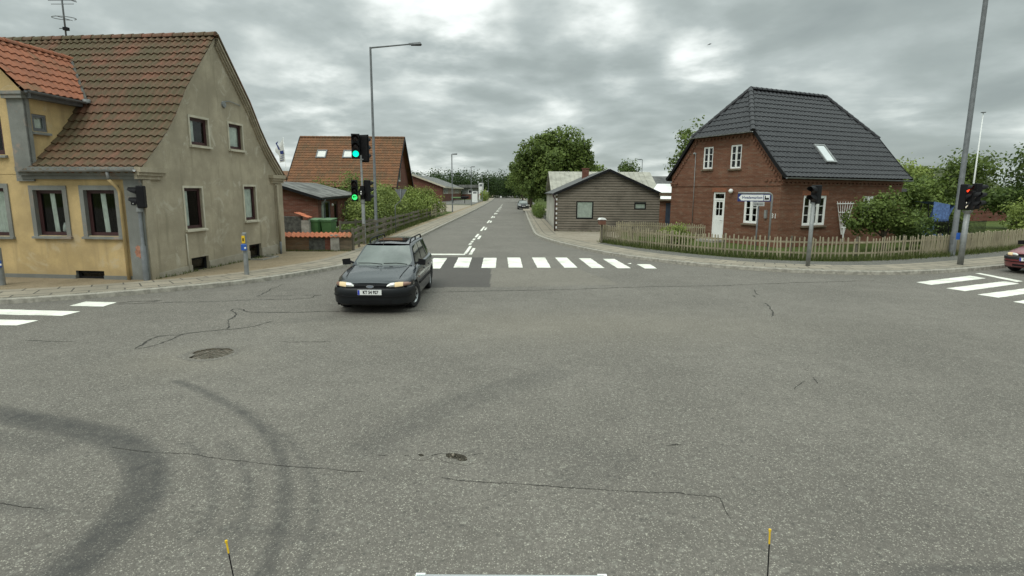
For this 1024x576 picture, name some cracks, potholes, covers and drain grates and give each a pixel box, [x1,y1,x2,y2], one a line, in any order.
crack [442,477,731,519]
crack [114,447,361,472]
pothole [437,449,476,465]
manhole cover [180,346,241,362]
crack [135,285,394,349]
